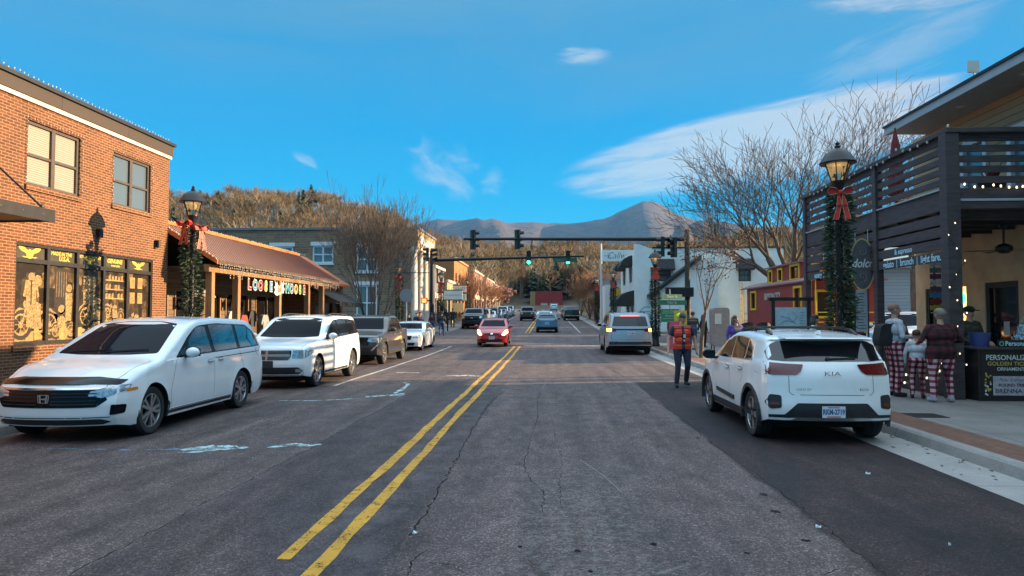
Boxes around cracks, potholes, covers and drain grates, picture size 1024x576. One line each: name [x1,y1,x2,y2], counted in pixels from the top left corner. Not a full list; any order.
crack [407,392,502,576]
crack [523,393,563,514]
